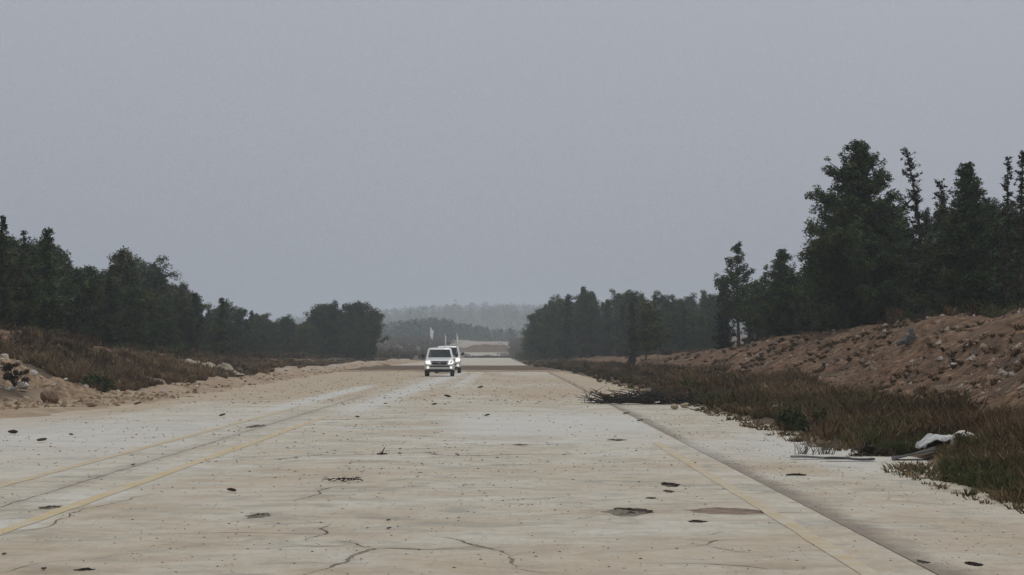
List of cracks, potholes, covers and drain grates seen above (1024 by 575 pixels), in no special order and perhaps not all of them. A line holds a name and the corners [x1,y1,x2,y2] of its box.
crack [133,523,549,575]
pothole [601,508,654,517]
crack [2,396,434,507]
